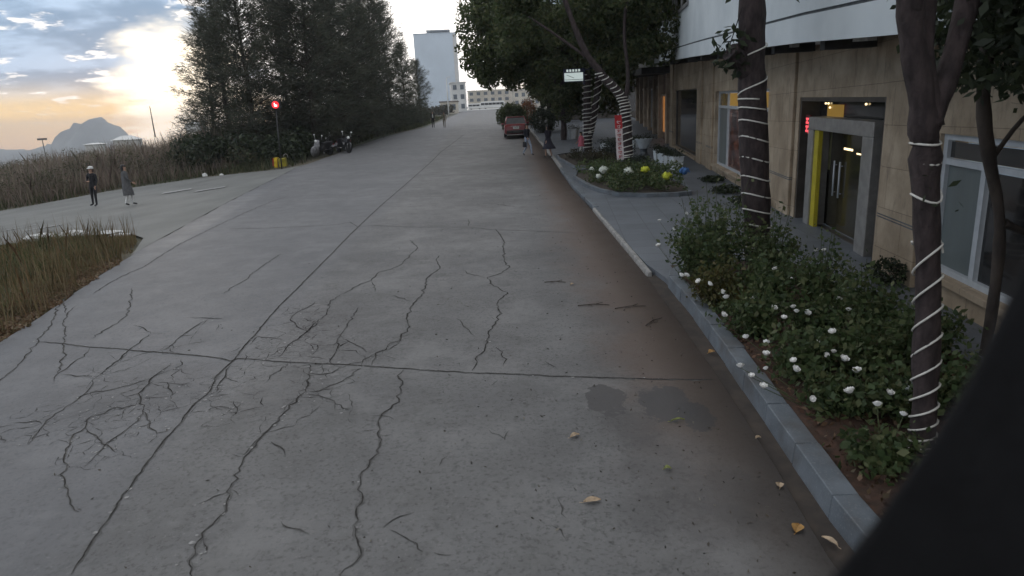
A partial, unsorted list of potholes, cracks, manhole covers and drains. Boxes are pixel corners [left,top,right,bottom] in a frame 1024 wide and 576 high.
crack [0,198,453,576]
crack [458,229,510,385]
